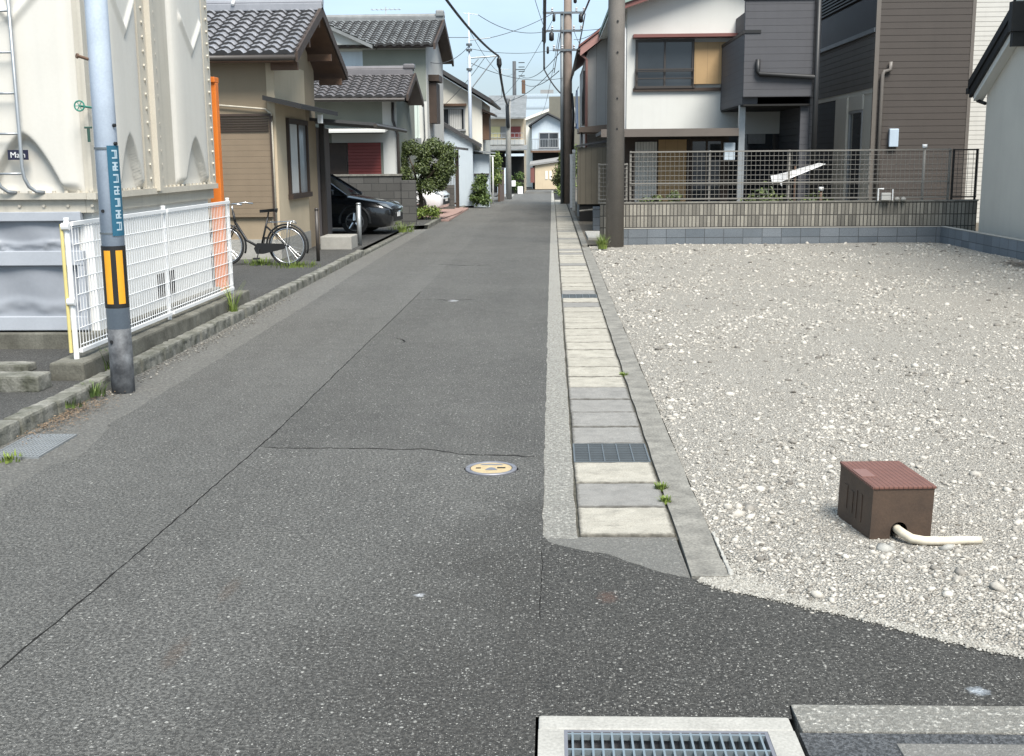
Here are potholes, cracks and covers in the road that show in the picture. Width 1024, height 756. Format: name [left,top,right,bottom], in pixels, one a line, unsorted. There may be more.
drain grate [0,434,77,459]
drain grate [573,443,651,463]
manhole cover [465,461,517,476]
drain grate [538,716,805,756]
